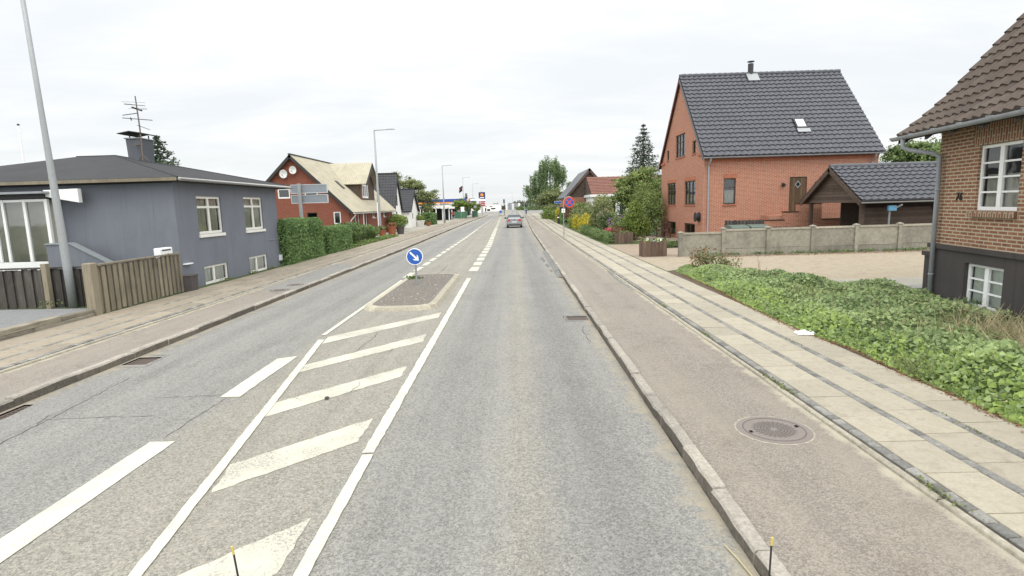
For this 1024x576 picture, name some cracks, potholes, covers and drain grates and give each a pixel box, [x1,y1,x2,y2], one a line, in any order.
drain grate [0,405,32,420]
crack [0,360,159,444]
drain grate [123,357,162,365]
manhole cover [734,416,816,445]
